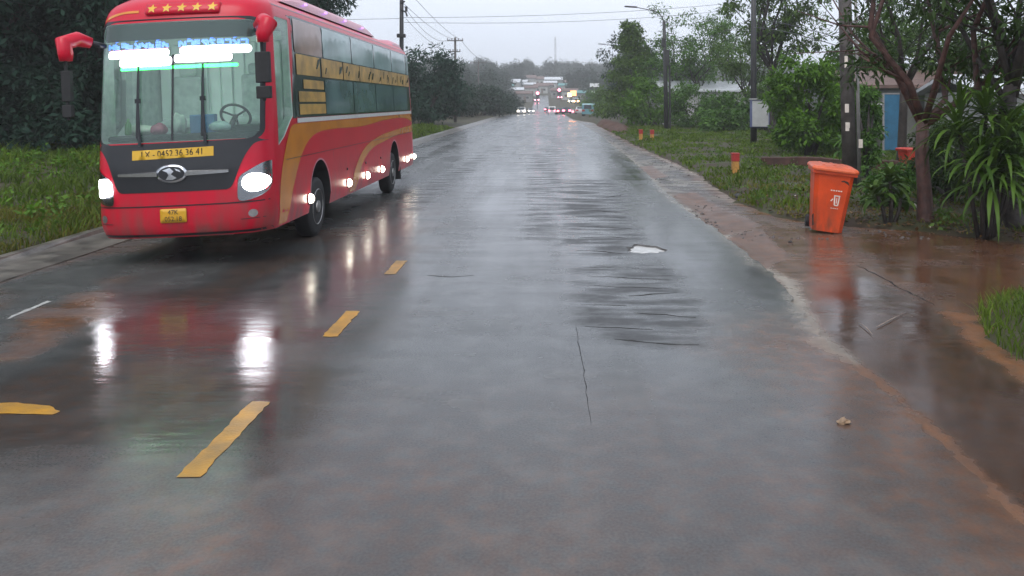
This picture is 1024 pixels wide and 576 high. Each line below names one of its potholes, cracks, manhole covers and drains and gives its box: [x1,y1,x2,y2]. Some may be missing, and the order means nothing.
crack [858,266,934,305]
crack [576,194,699,420]
pothole [626,244,667,254]
